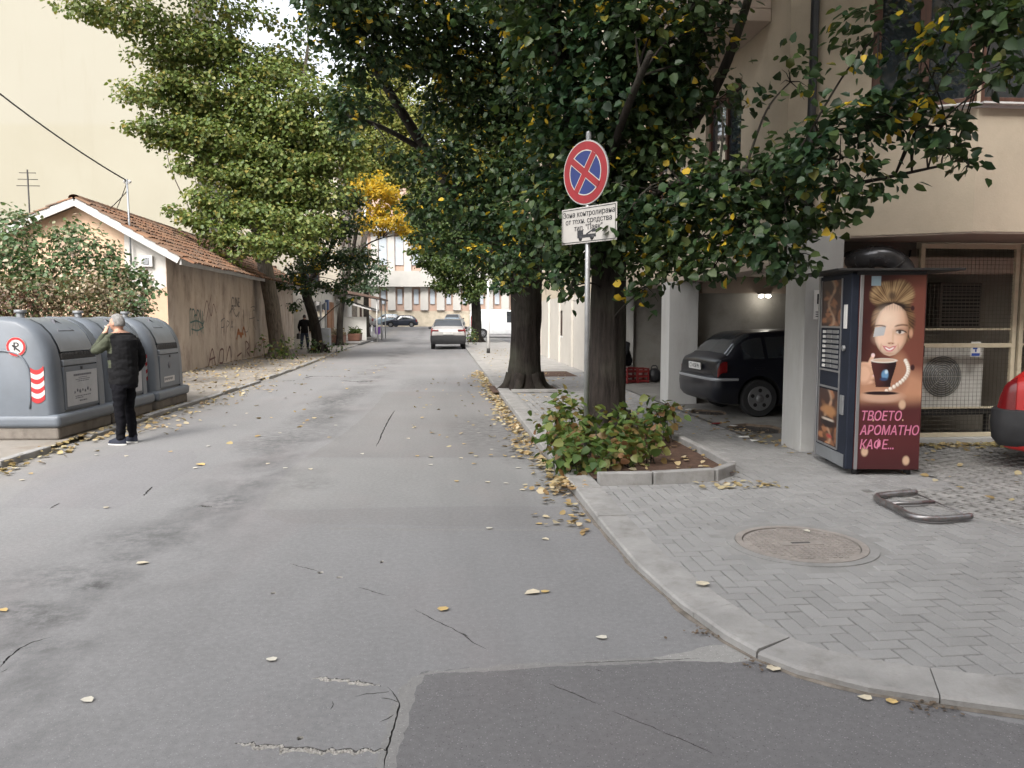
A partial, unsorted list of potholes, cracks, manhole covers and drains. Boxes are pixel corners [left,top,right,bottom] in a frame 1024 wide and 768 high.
crack [0,636,53,672]
manhole cover [696,518,912,578]
crack [415,609,484,648]
crack [549,683,711,753]
crack [235,677,400,766]
